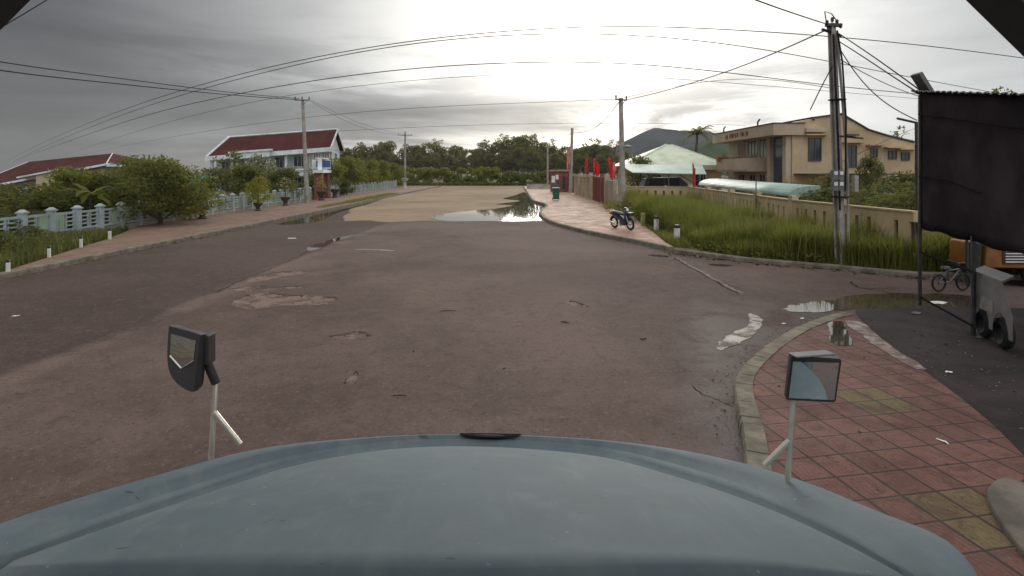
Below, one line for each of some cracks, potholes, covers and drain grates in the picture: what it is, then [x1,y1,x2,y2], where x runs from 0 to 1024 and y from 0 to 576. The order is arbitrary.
pothole [230,292,339,309]
pothole [329,331,373,340]
pothole [343,371,359,384]
